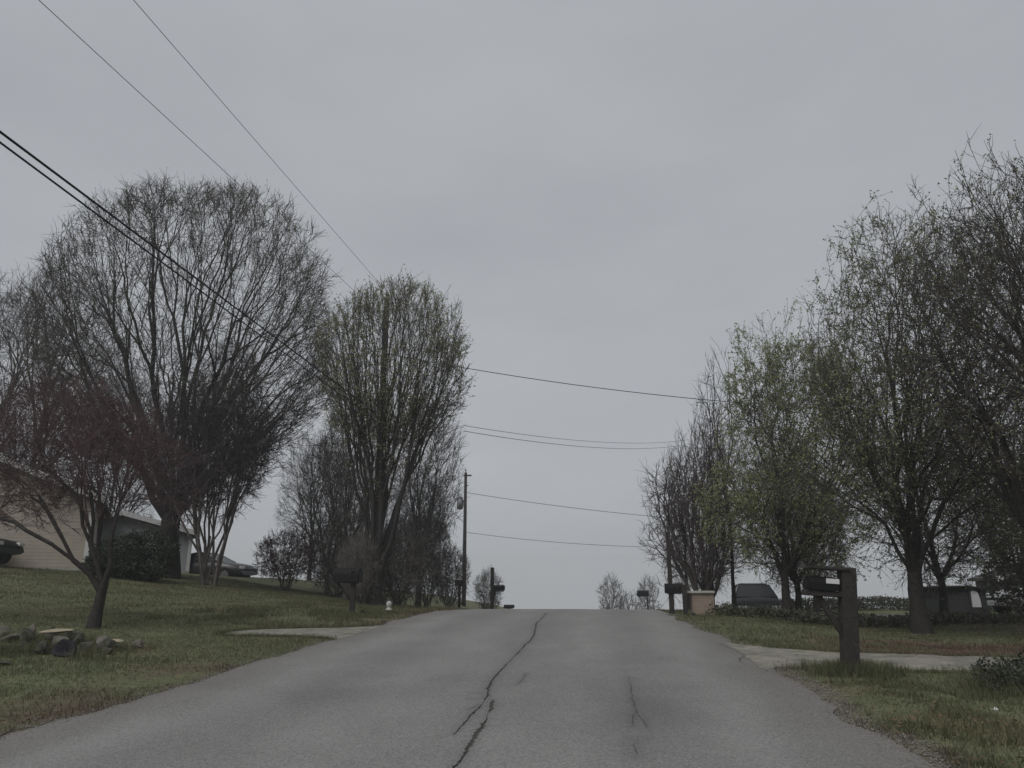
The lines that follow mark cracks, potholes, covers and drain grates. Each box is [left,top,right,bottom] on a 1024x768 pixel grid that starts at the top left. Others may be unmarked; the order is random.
crack [452,613,546,768]
crack [629,679,648,754]
